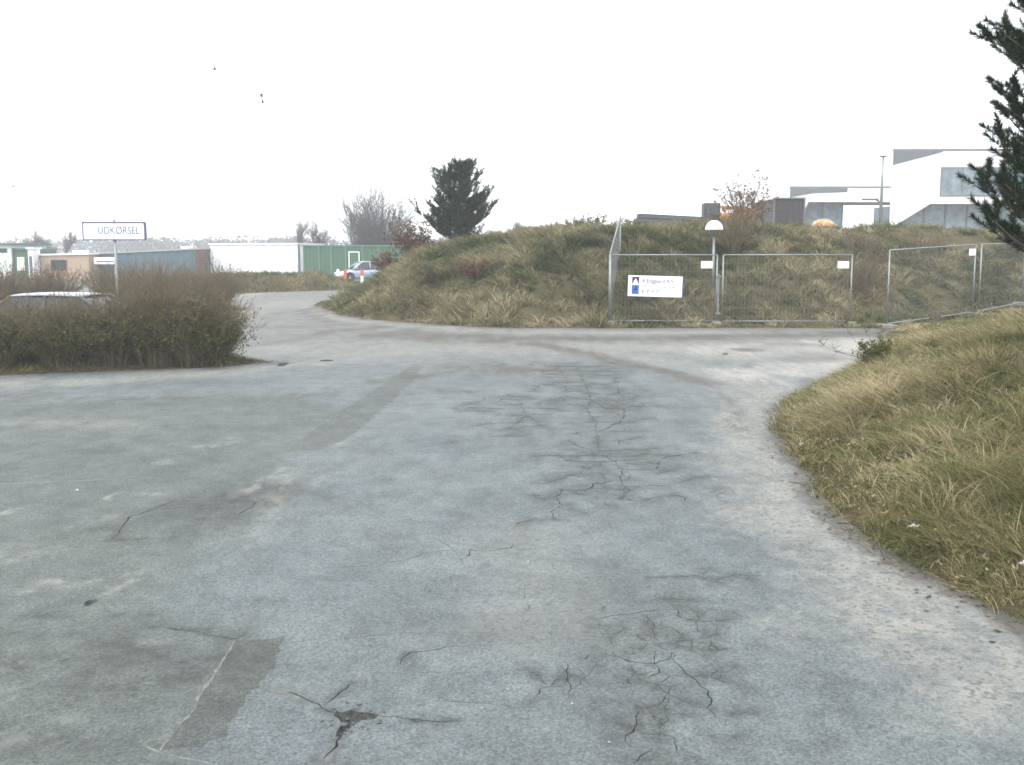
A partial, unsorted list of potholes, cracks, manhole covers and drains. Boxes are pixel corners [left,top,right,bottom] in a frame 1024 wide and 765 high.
crack [535,571,773,764]
crack [476,363,726,525]
crack [114,500,175,541]
pothole [320,700,385,738]
